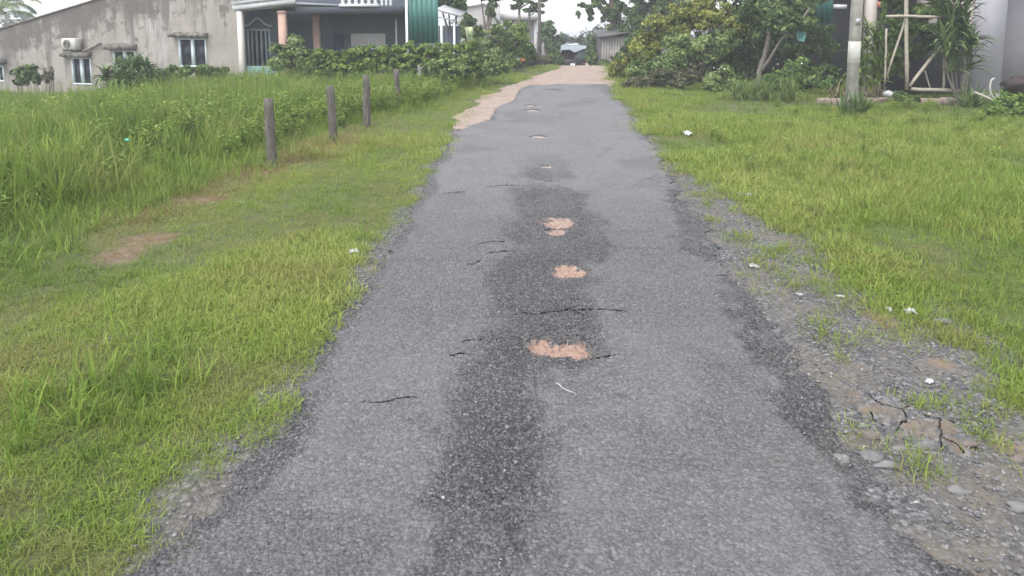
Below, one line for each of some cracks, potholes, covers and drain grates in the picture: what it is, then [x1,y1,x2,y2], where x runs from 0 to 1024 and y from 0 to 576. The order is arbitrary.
pothole [548,263,588,279]
pothole [526,338,599,360]
pothole [542,217,575,236]
crack [872,408,962,452]
